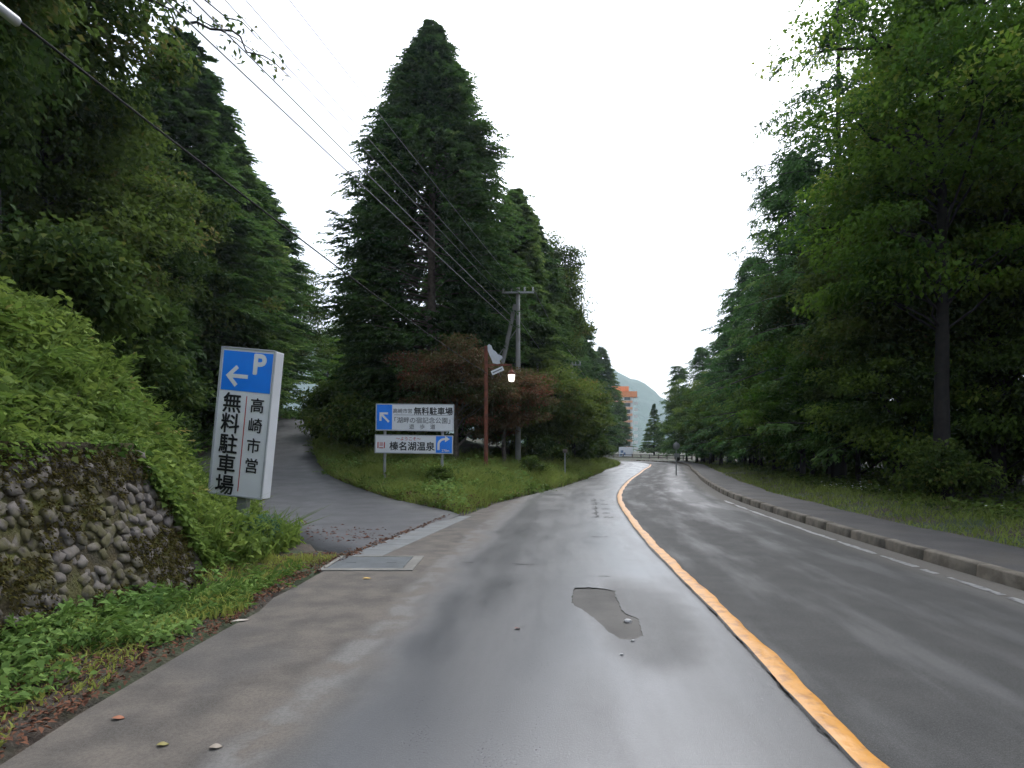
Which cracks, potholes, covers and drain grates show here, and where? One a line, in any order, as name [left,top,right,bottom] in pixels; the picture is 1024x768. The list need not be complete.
pothole [572,588,643,640]
manhole cover [318,556,424,573]
